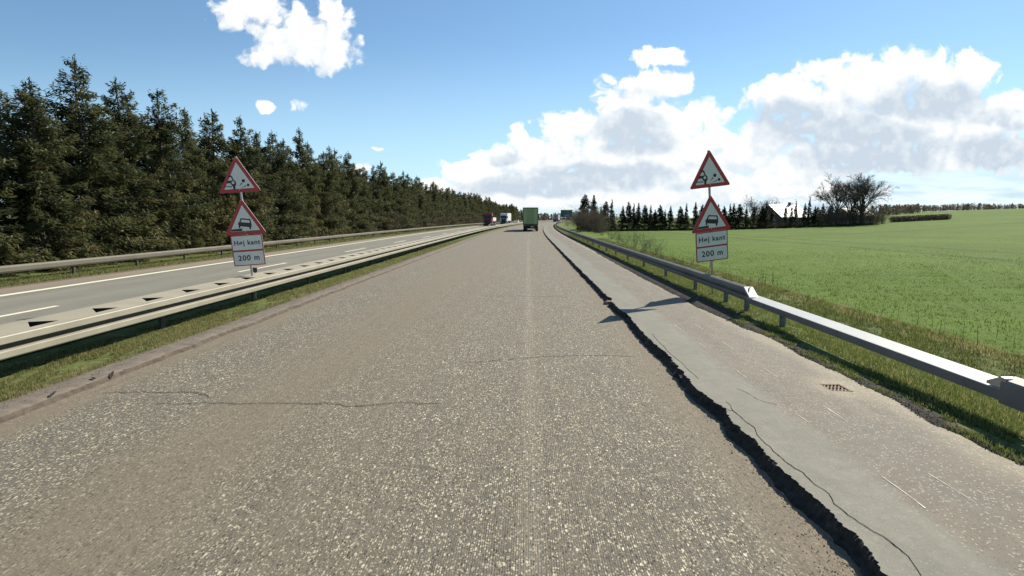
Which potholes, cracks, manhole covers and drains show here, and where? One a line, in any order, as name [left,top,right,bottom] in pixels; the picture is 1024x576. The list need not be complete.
drain grate [819,384,853,392]
crack [119,391,441,407]
crack [727,389,921,575]
